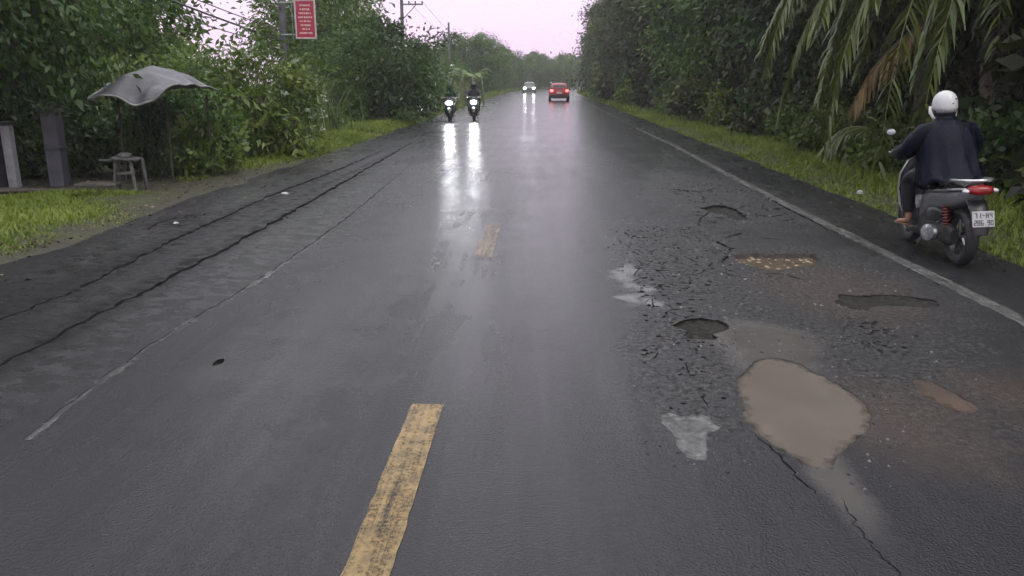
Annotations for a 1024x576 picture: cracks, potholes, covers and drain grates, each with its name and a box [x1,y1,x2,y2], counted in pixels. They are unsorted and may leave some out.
crack [624,176,828,412]
pothole [835,294,939,310]
pothole [673,318,729,340]
crack [843,500,901,576]
pothole [700,205,748,220]
crack [755,435,816,494]
